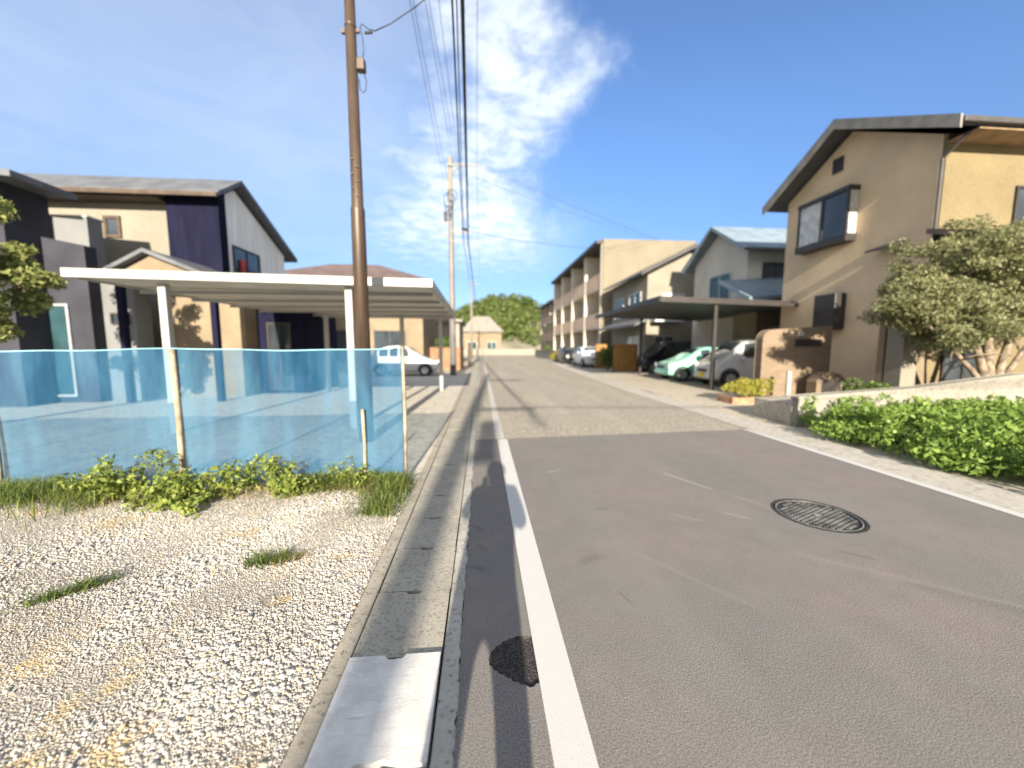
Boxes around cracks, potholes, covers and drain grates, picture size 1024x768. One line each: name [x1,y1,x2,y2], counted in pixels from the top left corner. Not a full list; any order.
manhole cover [770,499,870,534]
pothole [488,636,540,688]
